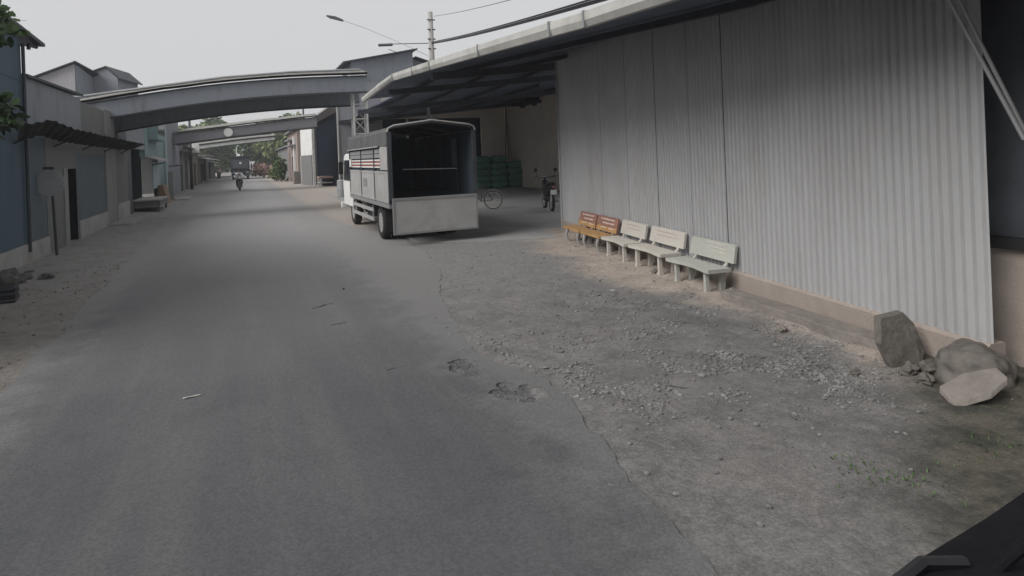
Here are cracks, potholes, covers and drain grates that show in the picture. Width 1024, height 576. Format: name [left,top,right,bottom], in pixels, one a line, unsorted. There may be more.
pothole [447,360,485,377]
pothole [490,383,551,403]
